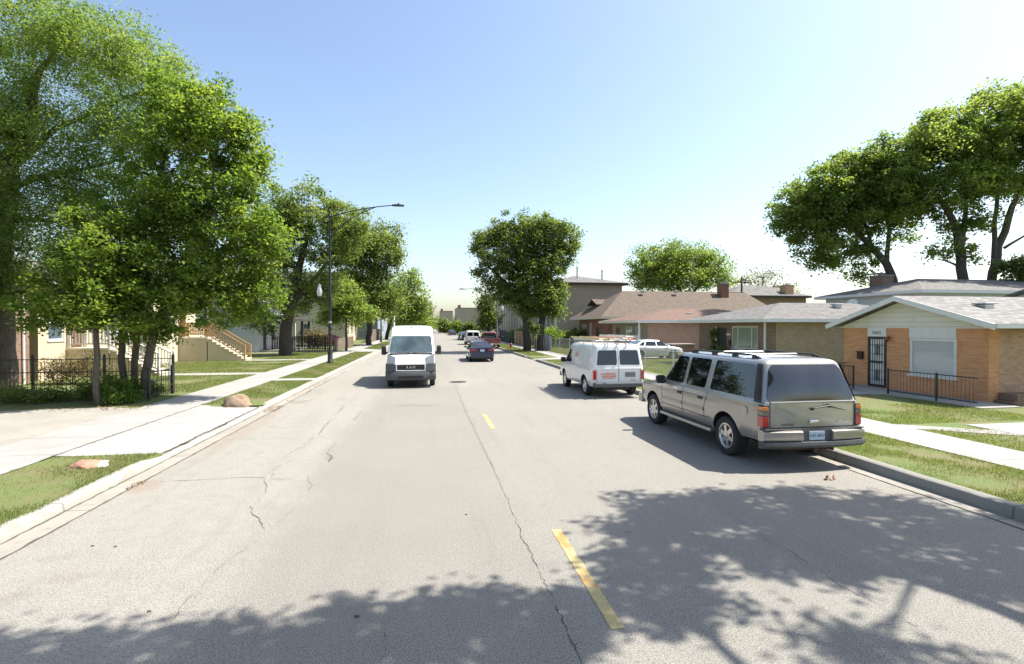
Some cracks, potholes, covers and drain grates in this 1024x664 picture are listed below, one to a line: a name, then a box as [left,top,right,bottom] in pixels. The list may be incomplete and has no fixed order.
crack [147,406,360,626]
crack [459,396,619,664]
